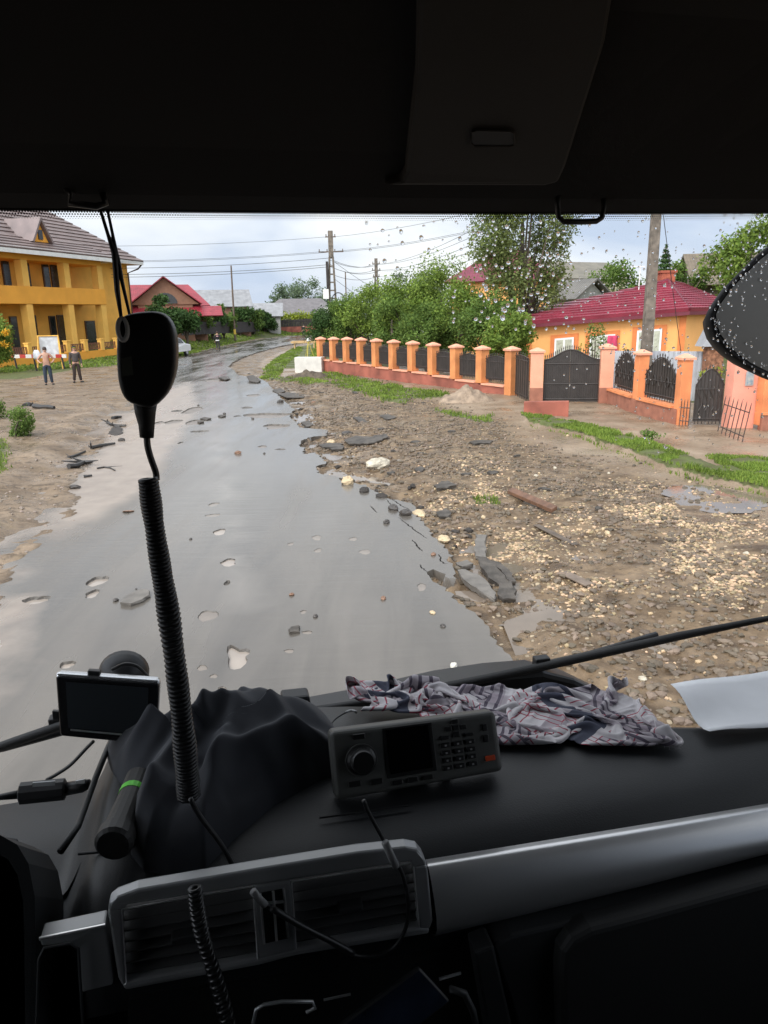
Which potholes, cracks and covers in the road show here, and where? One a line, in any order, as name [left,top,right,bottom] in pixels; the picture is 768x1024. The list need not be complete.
pothole [85,576,109,587]
pothole [227,645,250,670]
pothole [197,610,219,622]
crack [371,499,445,572]
pothole [22,596,51,604]
